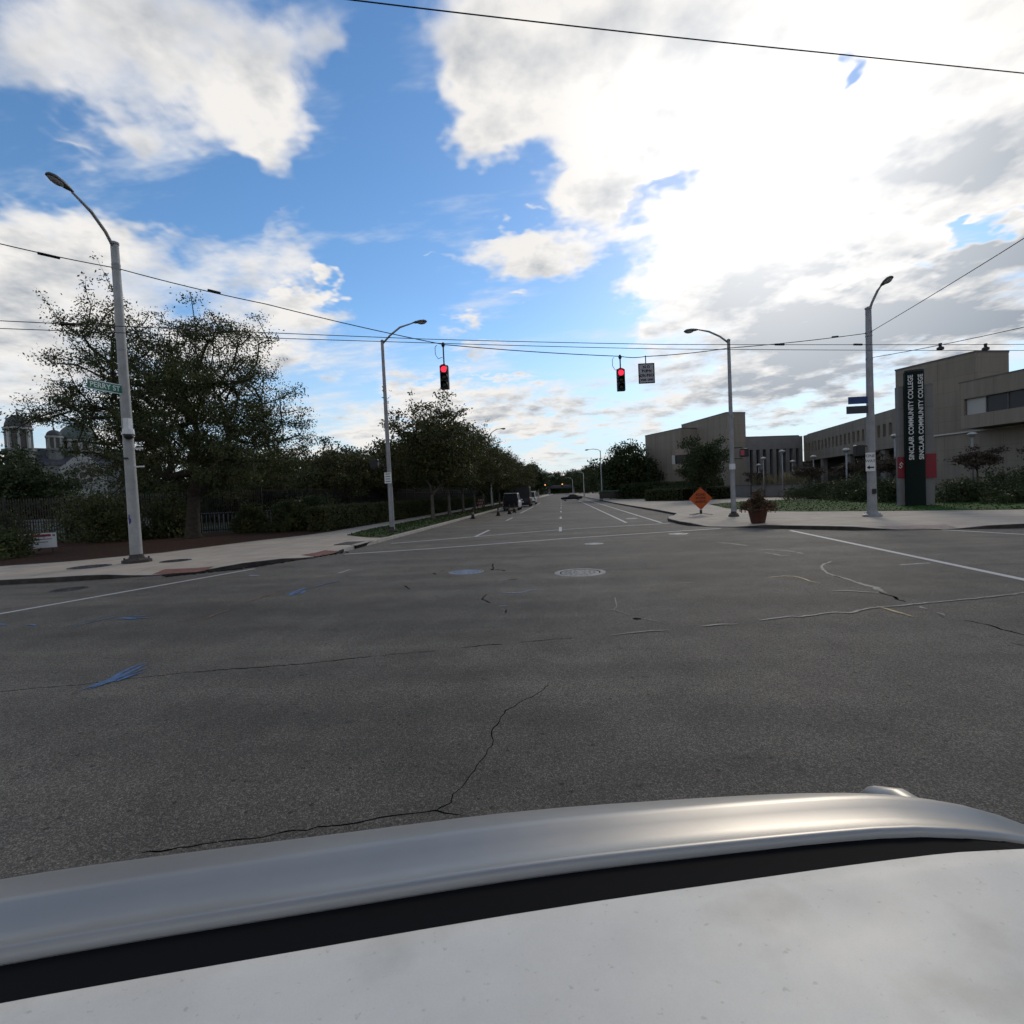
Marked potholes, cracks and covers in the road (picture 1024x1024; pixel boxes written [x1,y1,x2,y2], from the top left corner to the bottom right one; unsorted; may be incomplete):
crack [139,683,549,854]
crack [703,550,1024,646]
manhole cover [554,568,606,577]
